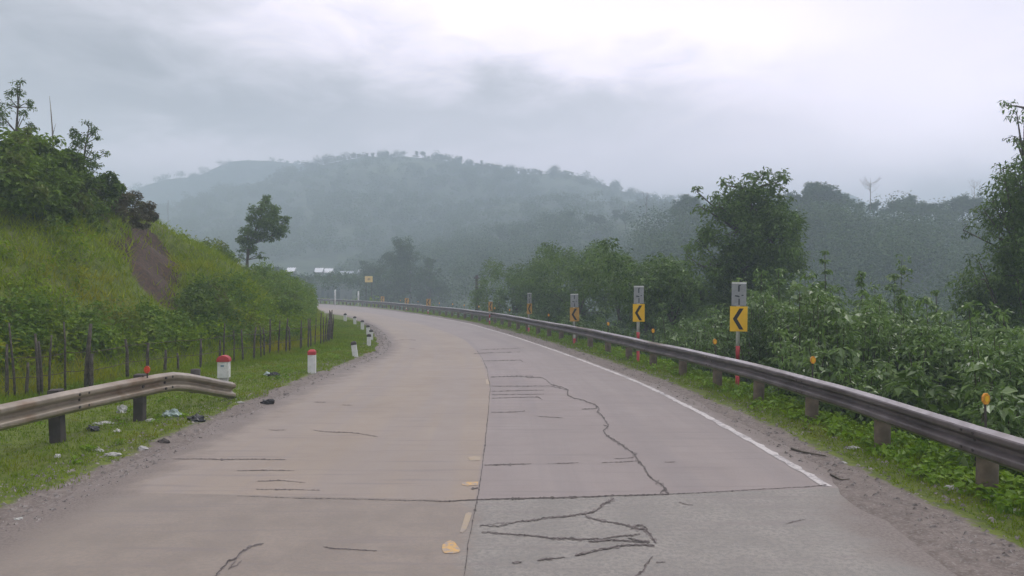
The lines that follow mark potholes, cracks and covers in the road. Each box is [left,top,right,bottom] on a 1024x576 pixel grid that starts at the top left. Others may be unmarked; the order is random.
crack [474,348,692,576]
crack [171,458,314,490]
crack [215,543,264,576]
